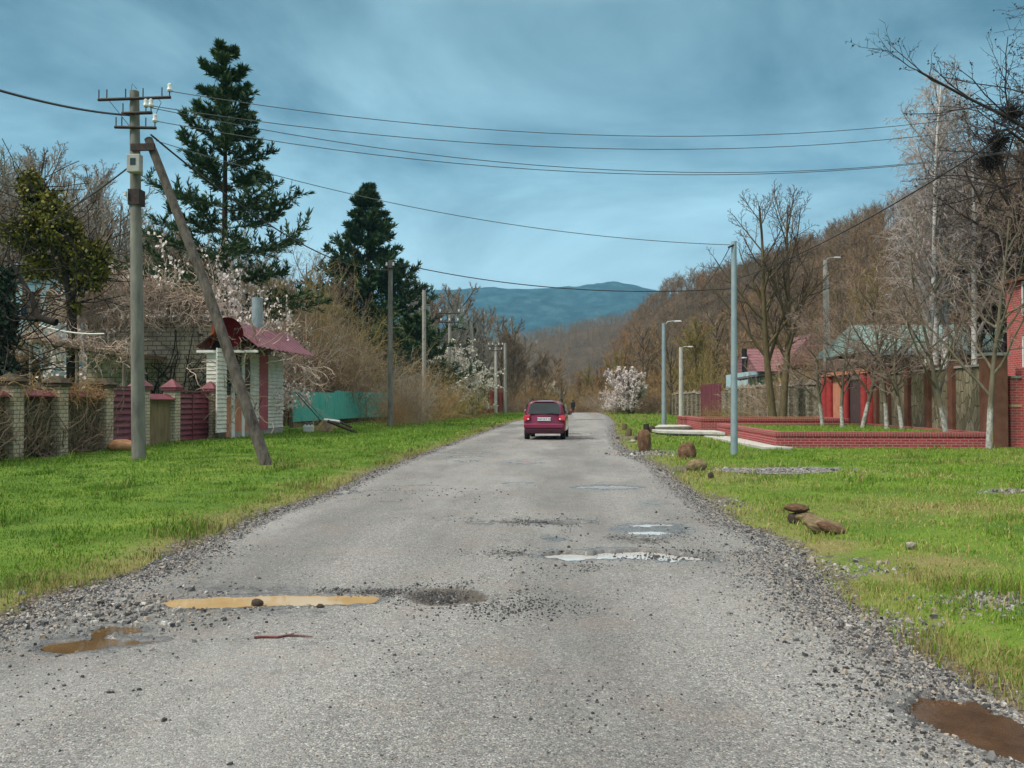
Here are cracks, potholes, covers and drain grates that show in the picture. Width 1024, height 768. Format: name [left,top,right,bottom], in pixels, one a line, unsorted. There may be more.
pothole [882,688,1024,768]
pothole [529,546,726,563]
pothole [146,592,388,612]
pothole [27,620,174,657]
pothole [392,585,504,608]
